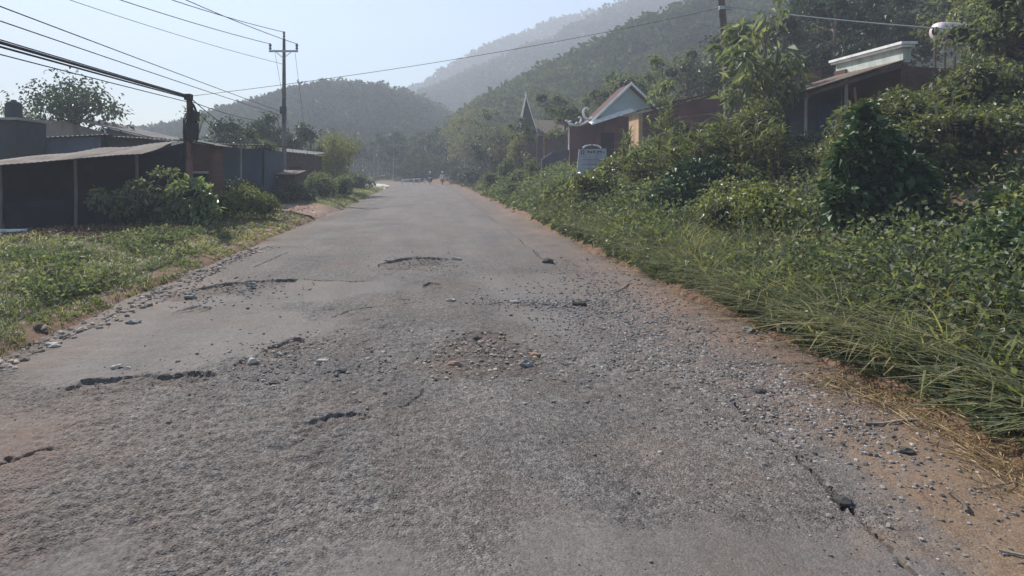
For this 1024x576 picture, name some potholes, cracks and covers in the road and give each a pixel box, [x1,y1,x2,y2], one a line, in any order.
crack [734,404,919,576]
pothole [57,371,218,397]
pothole [294,412,372,440]
pothole [163,279,297,301]
crack [394,386,431,408]
pothole [378,257,449,270]
pothole [426,331,551,380]
